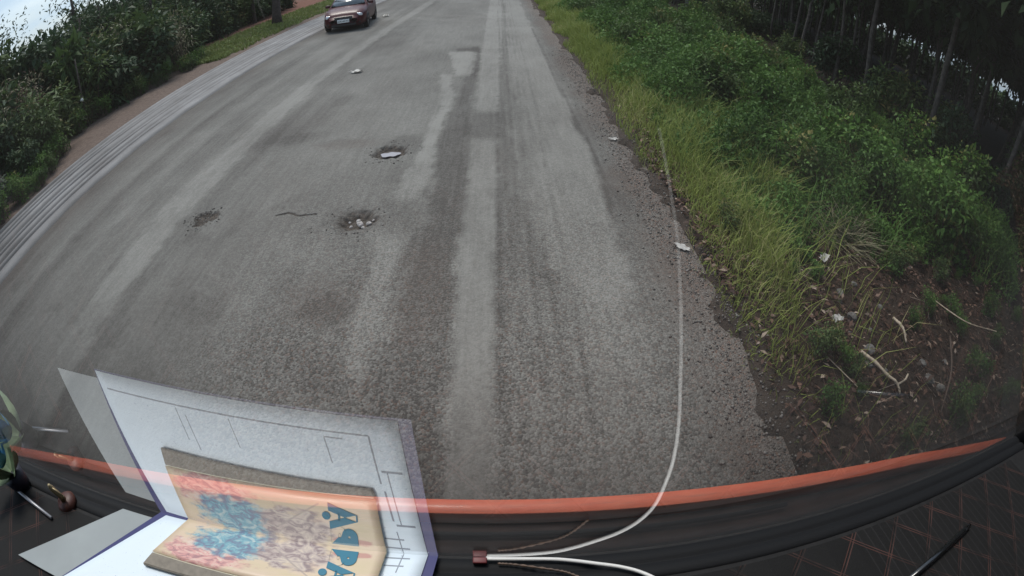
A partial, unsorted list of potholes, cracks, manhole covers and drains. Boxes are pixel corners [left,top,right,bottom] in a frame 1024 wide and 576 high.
pothole [368,144,410,160]
pothole [330,209,383,233]
pothole [192,210,221,228]
